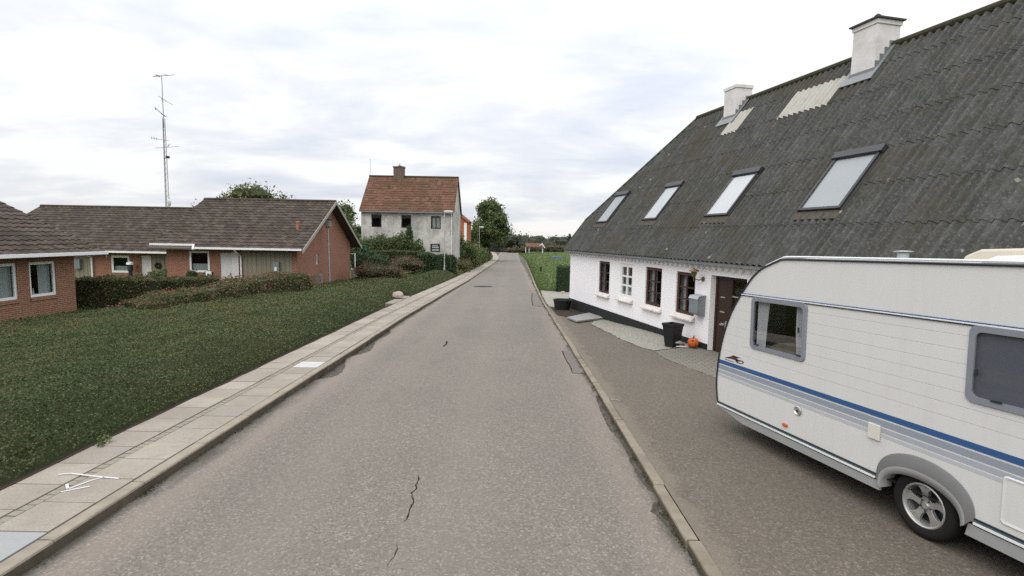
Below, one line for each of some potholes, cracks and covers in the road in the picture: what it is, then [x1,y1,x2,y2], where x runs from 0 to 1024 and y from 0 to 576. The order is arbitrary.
pothole [353,331,391,356]
crack [405,476,420,521]
pothole [320,360,346,379]
